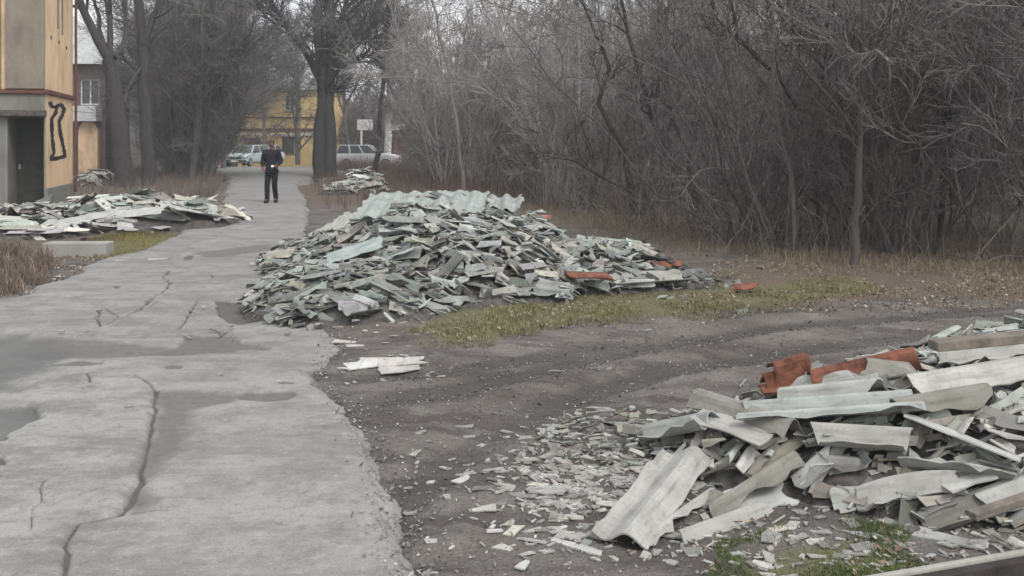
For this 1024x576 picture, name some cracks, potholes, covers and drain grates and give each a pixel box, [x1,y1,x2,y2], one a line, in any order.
crack [49,266,206,340]
crack [0,371,204,576]
